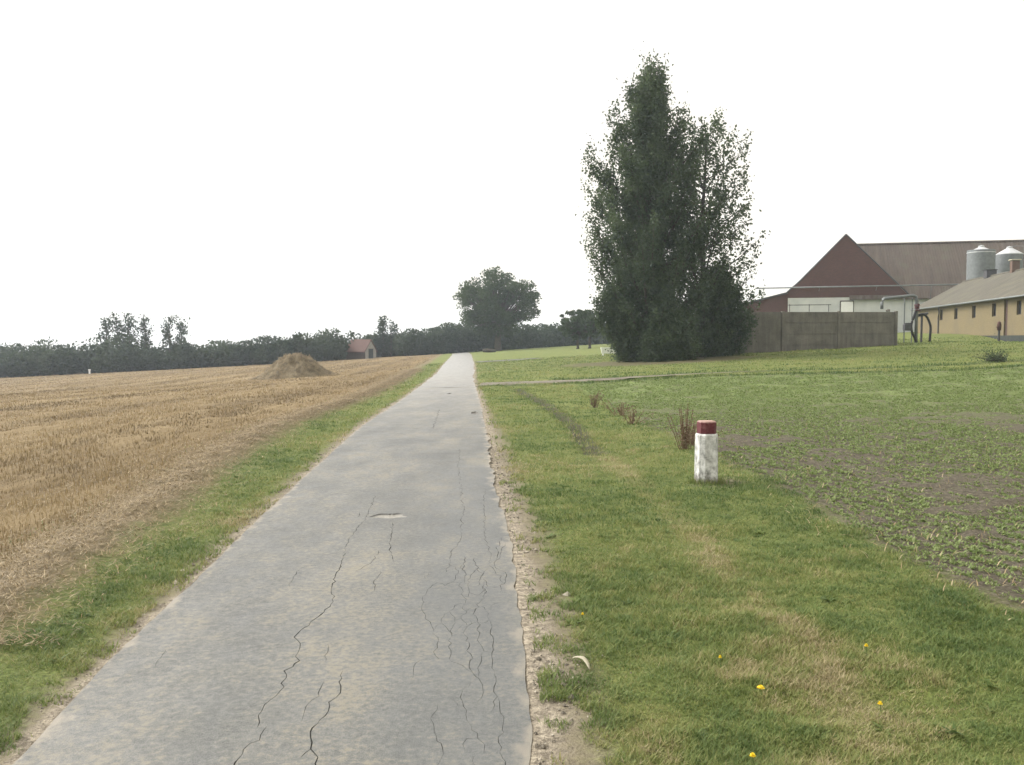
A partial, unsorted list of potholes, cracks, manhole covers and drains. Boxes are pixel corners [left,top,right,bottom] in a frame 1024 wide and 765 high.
crack [233,497,393,765]
crack [412,449,507,765]
